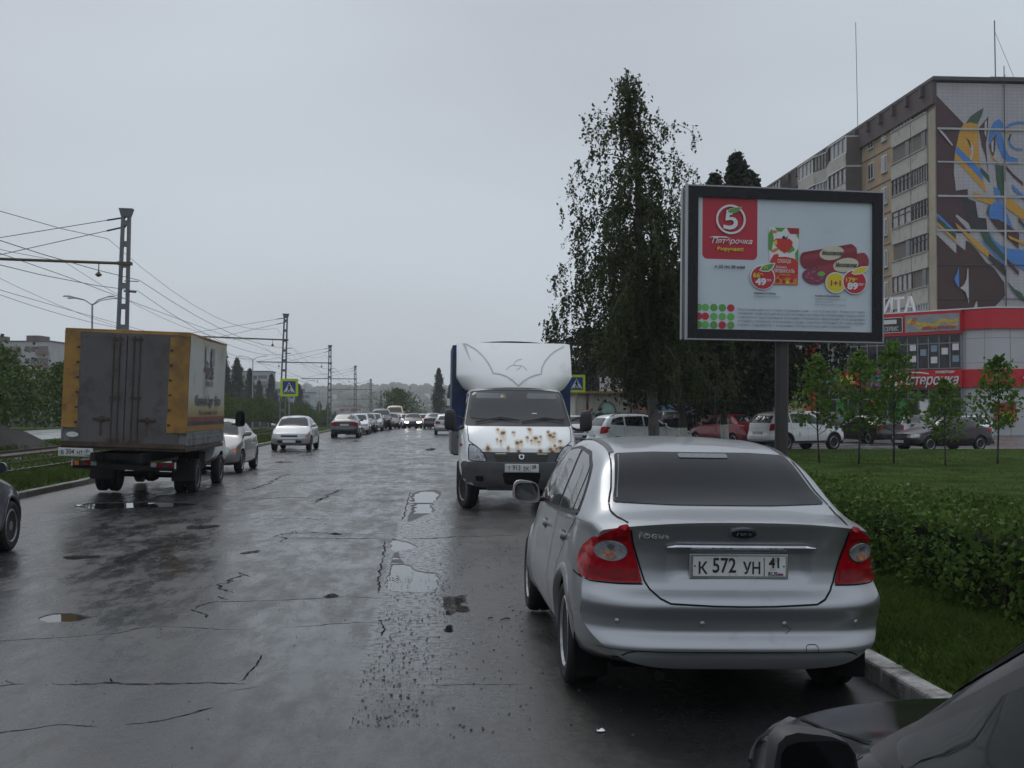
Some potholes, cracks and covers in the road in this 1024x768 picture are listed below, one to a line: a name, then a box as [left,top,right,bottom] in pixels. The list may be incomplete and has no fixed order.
pothole [407,490,442,522]
crack [4,573,381,641]
pothole [38,613,91,622]
crack [125,708,210,725]
crack [242,473,512,543]
pothole [441,595,470,616]
pothole [385,552,440,592]
crack [52,656,262,691]
crack [0,724,94,734]
pothole [389,538,417,551]
